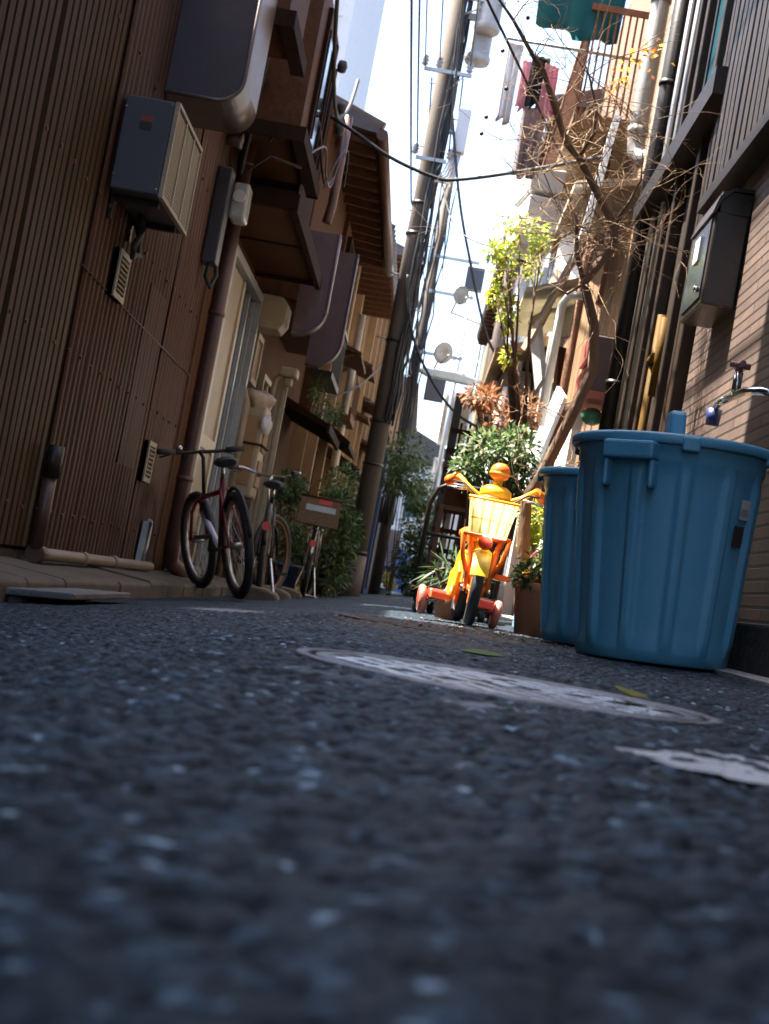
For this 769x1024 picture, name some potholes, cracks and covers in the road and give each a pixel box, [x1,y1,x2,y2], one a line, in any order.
manhole cover [293,648,725,728]
